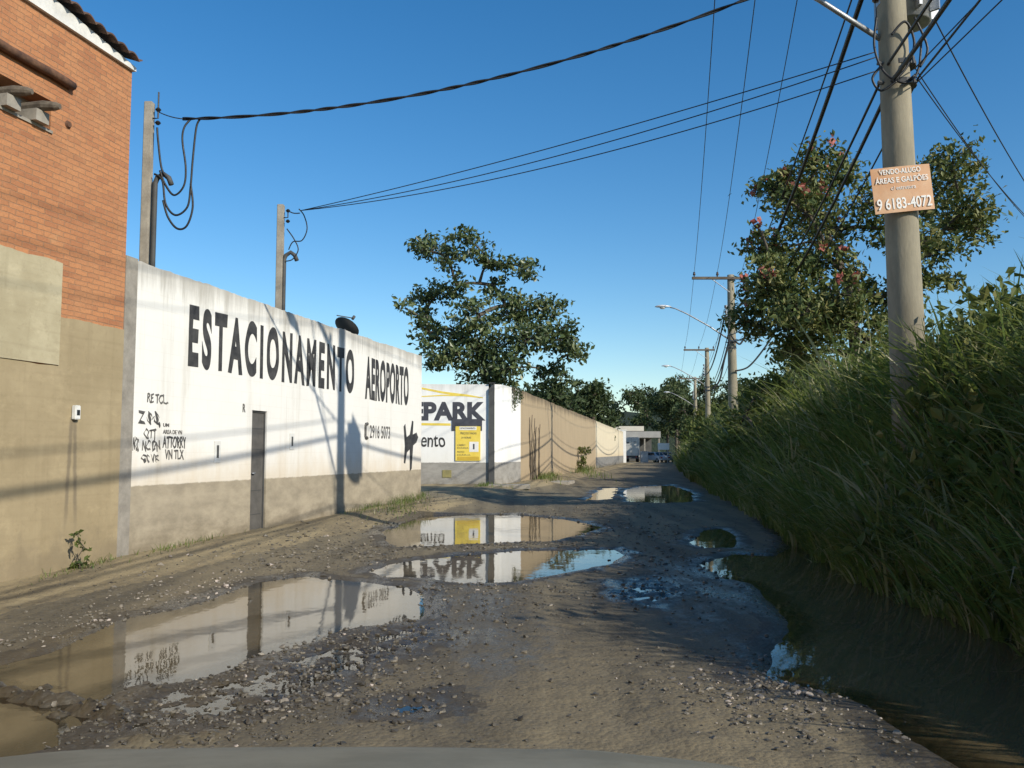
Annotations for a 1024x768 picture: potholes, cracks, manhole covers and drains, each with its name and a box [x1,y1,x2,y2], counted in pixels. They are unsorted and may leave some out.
pothole [363,511,616,548]
pothole [577,487,623,501]
pothole [347,546,643,586]
pothole [618,484,708,504]
pothole [0,571,455,757]
pothole [683,515,1024,768]
